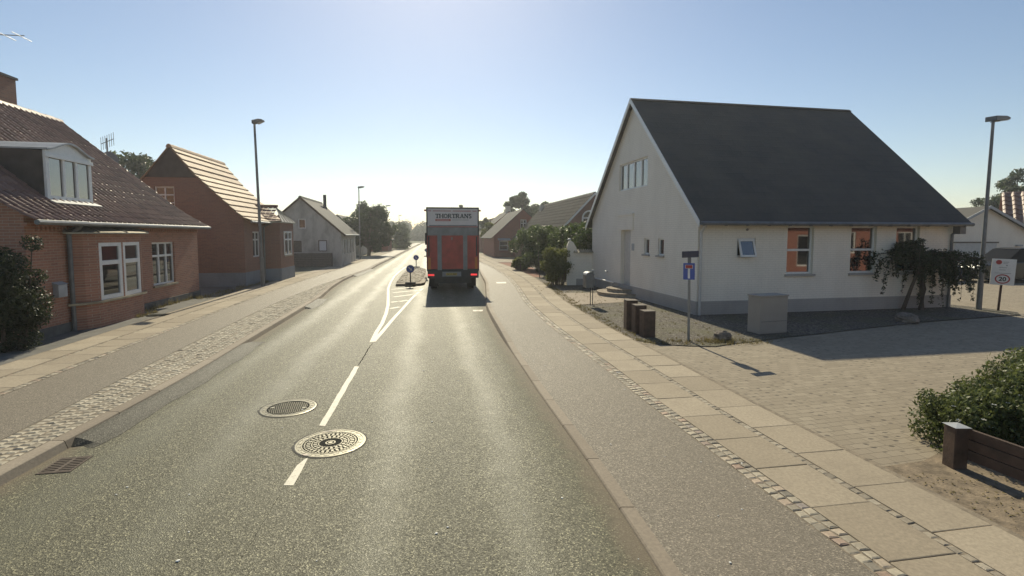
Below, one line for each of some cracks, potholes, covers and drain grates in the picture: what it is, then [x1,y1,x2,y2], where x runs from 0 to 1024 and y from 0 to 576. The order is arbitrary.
drain grate [35,456,93,475]
manhole cover [291,429,368,459]
manhole cover [257,399,318,418]
